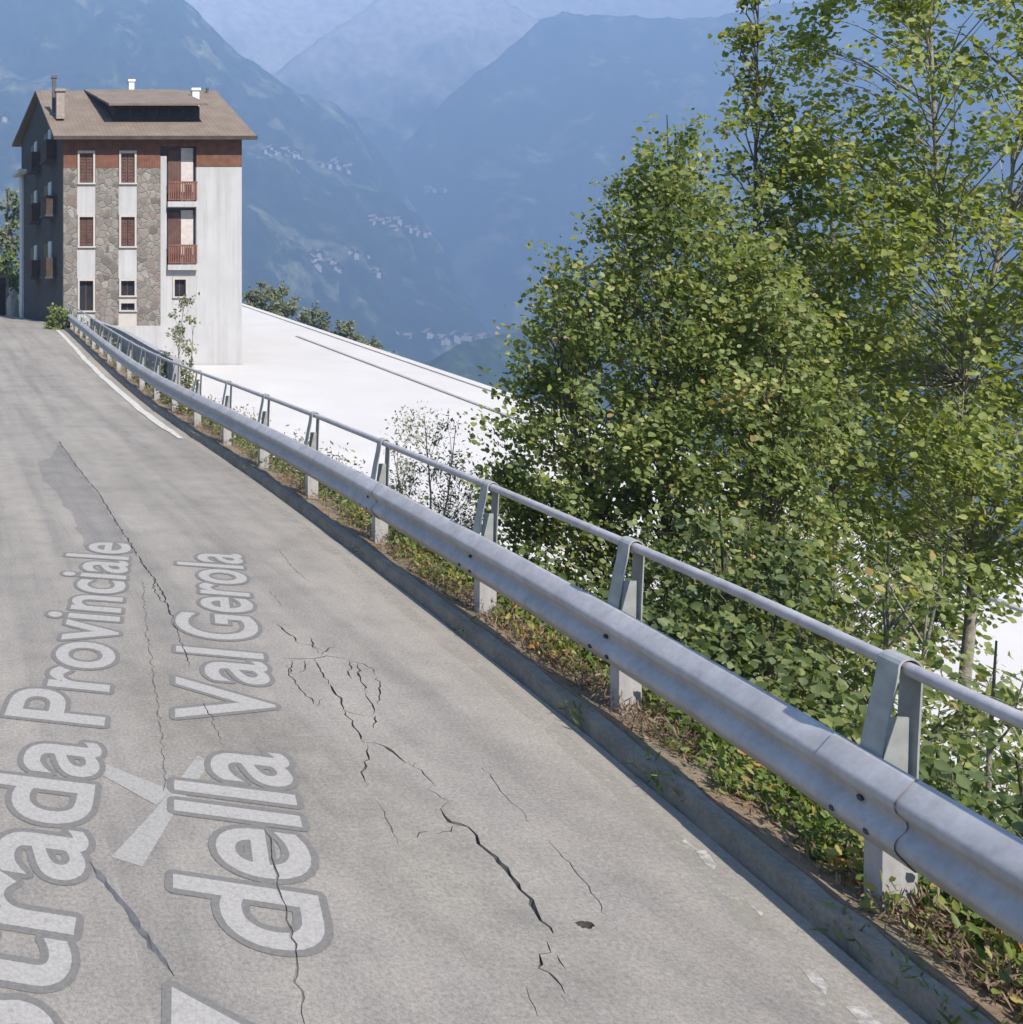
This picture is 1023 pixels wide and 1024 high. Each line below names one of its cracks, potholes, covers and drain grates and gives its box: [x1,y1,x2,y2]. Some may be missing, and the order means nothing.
crack [278,625,606,1016]
crack [59,441,190,667]
